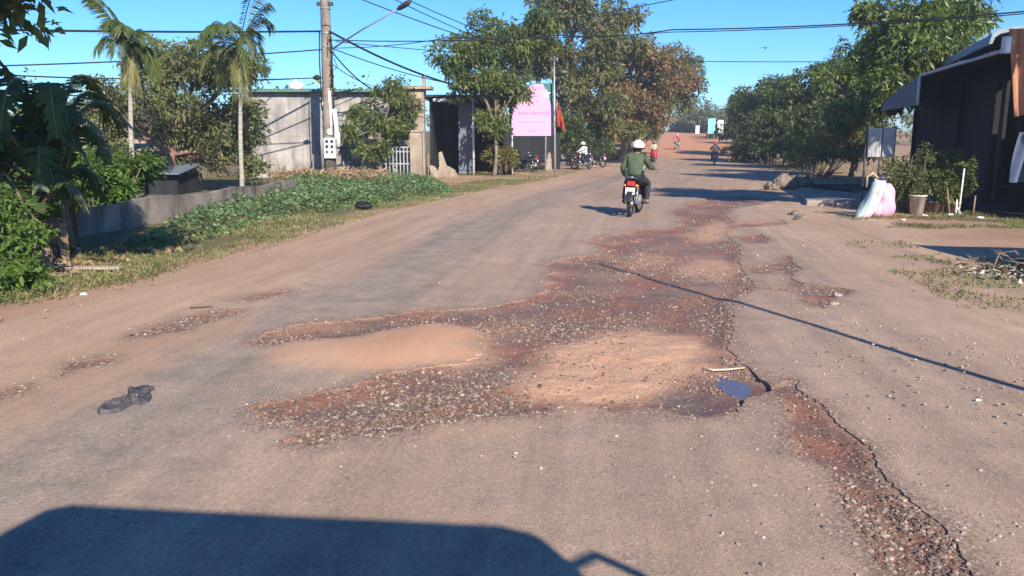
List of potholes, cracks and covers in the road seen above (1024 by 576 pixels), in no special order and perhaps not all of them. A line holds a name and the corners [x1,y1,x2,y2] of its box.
pothole [0,386,30,397]
pothole [61,356,114,376]
pothole [246,196,787,447]
pothole [130,310,241,338]
pothole [747,255,854,308]
